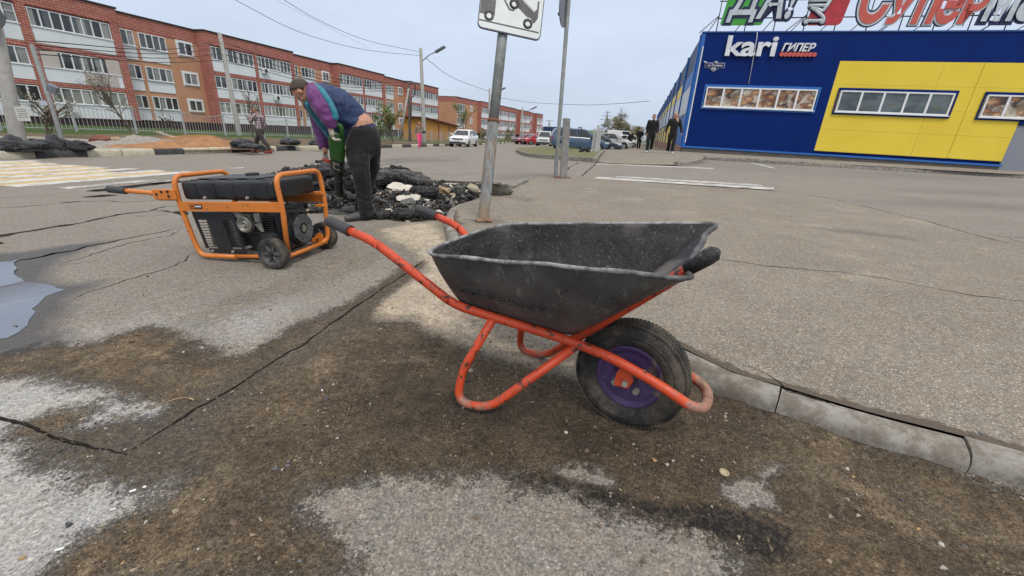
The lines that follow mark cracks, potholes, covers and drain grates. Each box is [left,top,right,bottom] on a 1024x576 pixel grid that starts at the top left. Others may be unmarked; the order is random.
crack [0,260,425,456]
crack [0,194,179,265]
pothole [287,180,501,222]
crack [728,260,1024,302]
crack [778,191,1023,243]
